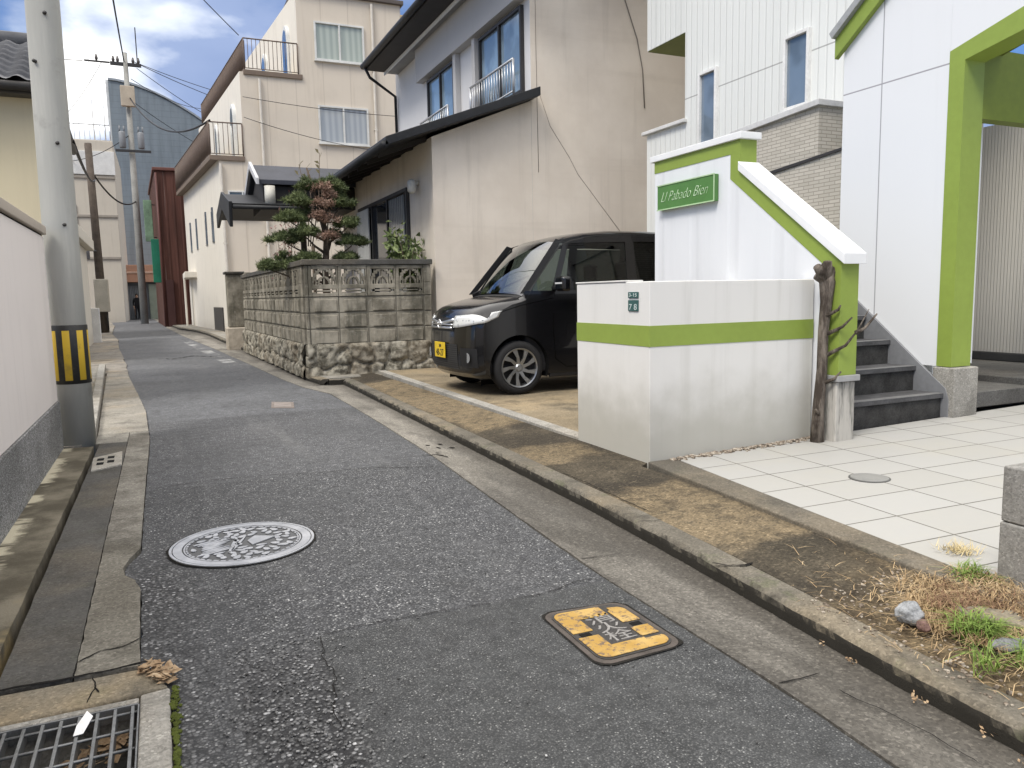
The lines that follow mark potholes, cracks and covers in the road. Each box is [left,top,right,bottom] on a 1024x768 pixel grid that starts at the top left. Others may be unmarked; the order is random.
manhole cover [165,522,316,568]
utility cover [848,473,891,483]
crack [0,638,147,702]
drain grate [0,703,140,768]
crack [320,637,346,729]
crack [840,690,976,761]
